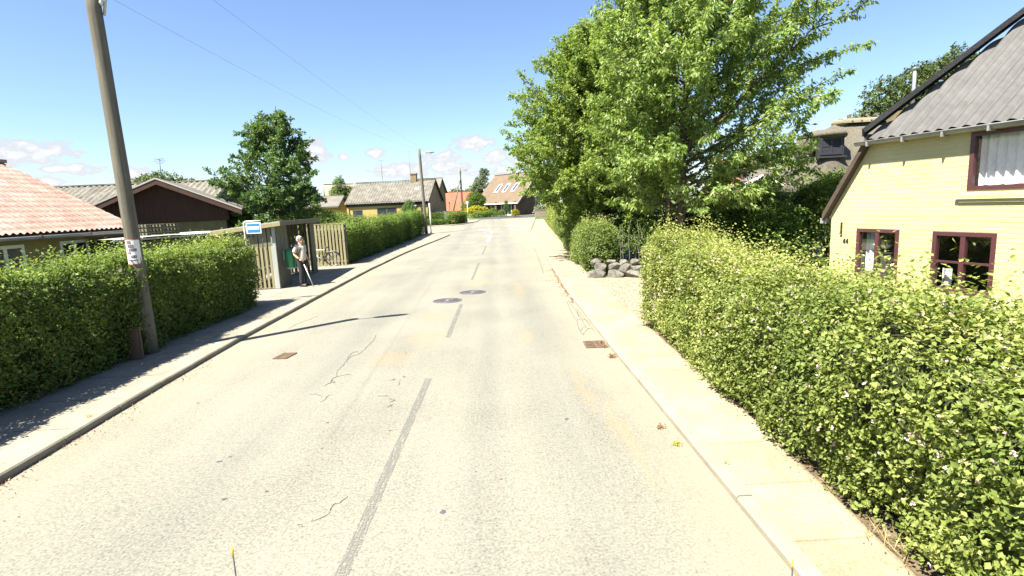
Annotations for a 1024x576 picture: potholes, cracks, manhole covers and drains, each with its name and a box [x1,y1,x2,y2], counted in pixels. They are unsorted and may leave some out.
crack [317,338,375,402]
drain grate [583,340,608,348]
